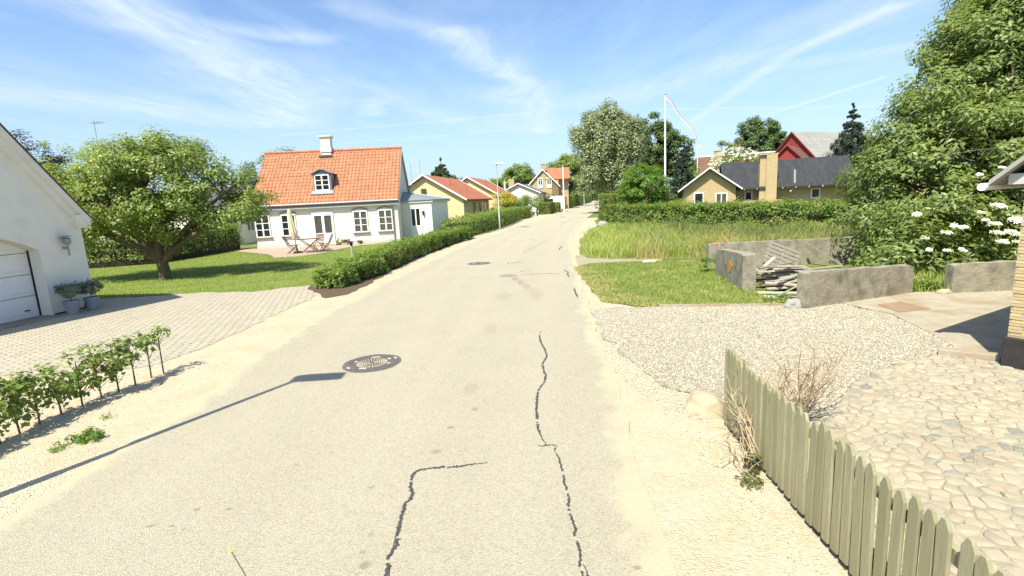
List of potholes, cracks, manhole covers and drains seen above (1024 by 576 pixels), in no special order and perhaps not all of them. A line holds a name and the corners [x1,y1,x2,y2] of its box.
crack [535,331,589,576]
crack [383,462,488,576]
manhole cover [342,354,401,373]
